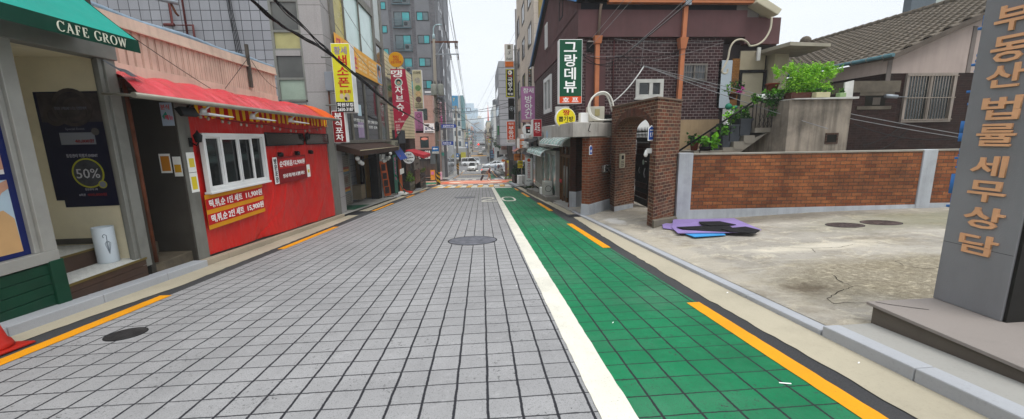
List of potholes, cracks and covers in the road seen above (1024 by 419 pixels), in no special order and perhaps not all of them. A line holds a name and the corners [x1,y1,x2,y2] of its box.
manhole cover [448,236,497,245]
manhole cover [102,327,149,342]
